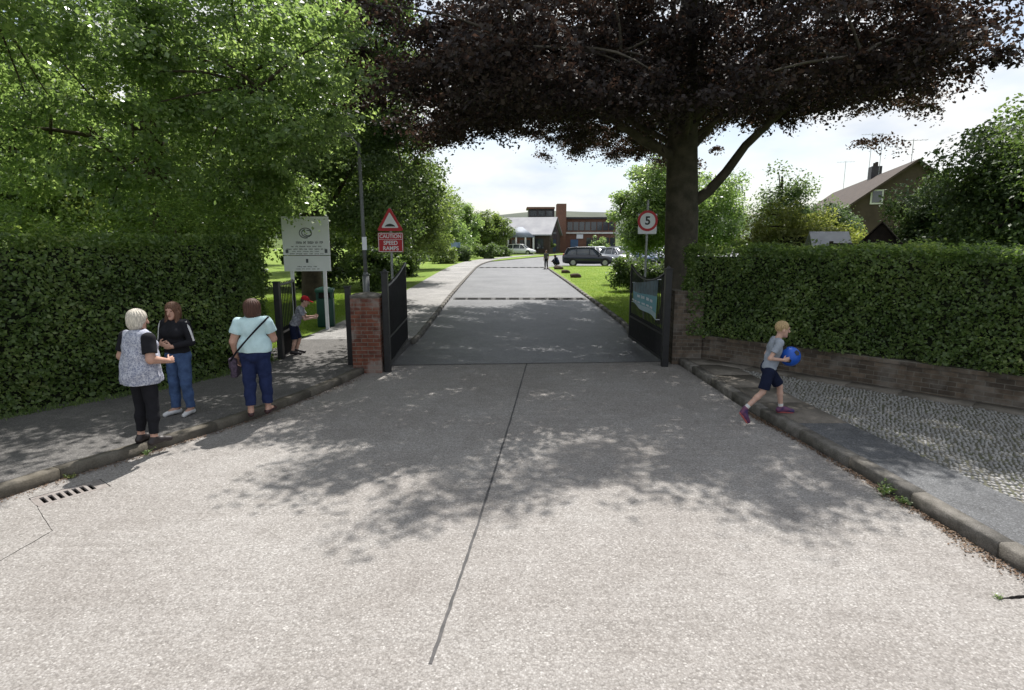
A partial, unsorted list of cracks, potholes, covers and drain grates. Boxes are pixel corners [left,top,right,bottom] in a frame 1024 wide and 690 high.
drain grate [30,480,110,507]
